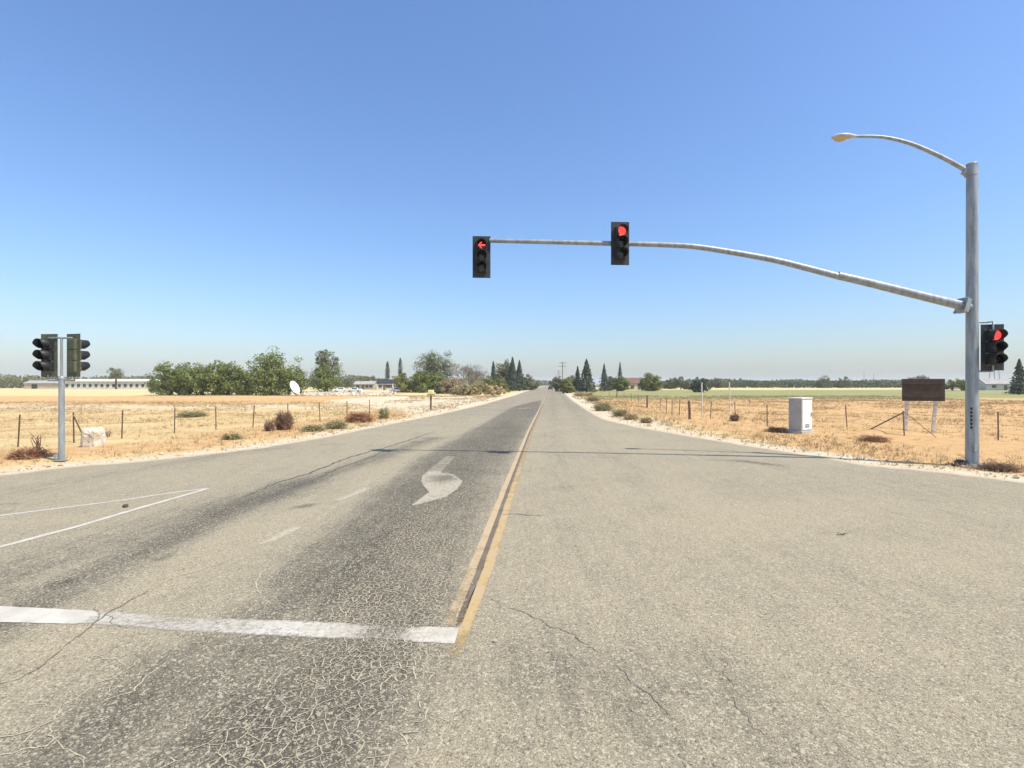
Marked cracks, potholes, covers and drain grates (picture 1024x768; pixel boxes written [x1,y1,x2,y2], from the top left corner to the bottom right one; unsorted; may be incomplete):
crack [490,597,688,742]
crack [255,555,306,596]
crack [722,657,785,745]
crack [0,556,238,684]
crack [0,653,168,766]
